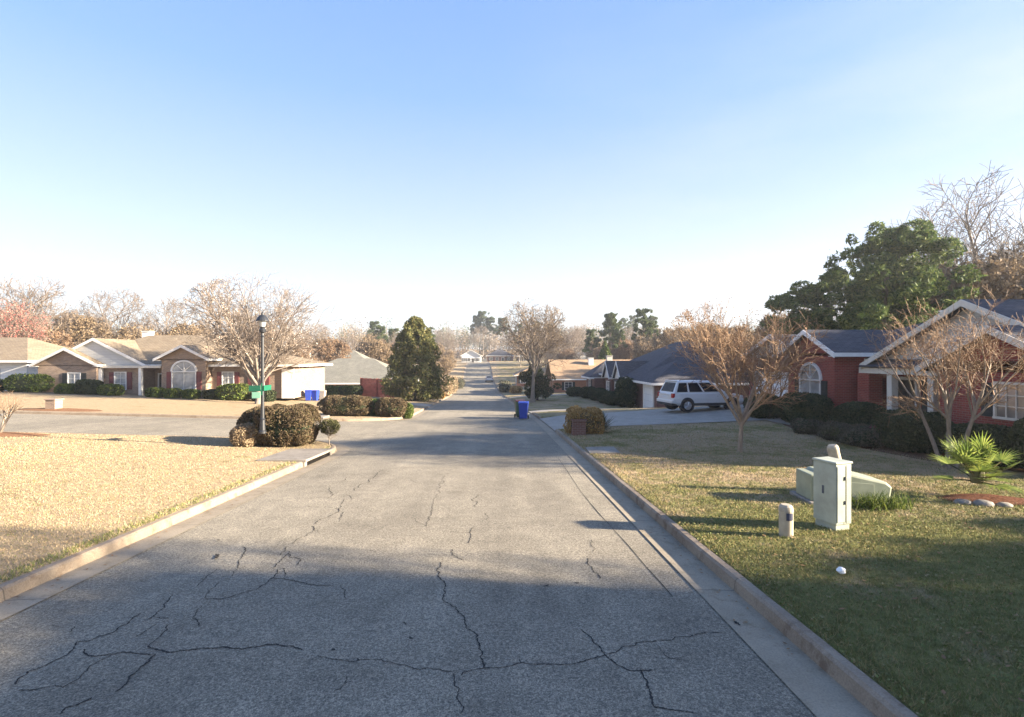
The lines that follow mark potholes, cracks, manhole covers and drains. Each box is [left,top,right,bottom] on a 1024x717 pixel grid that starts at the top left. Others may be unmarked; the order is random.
crack [14,495,722,714]
crack [193,472,378,625]
